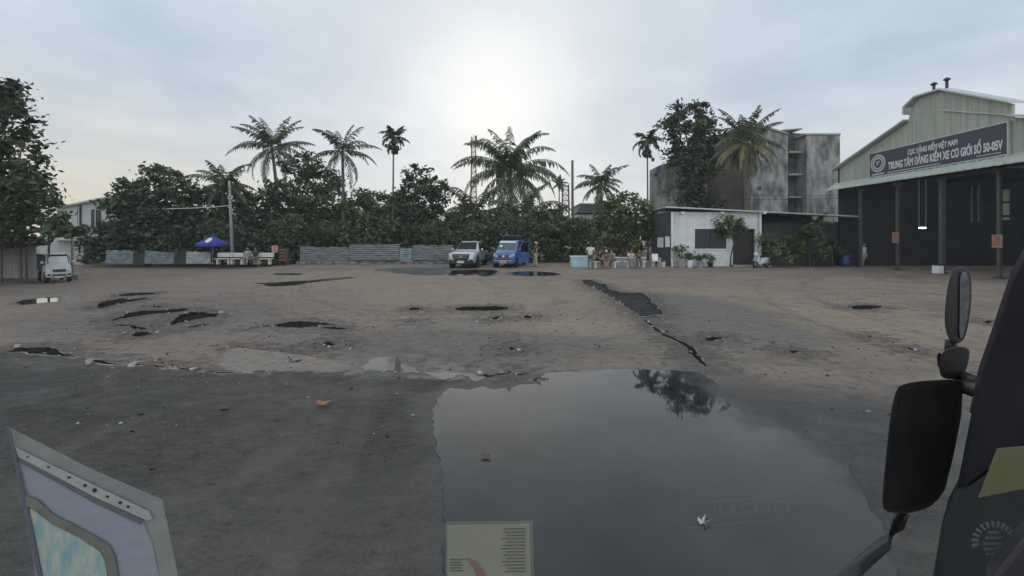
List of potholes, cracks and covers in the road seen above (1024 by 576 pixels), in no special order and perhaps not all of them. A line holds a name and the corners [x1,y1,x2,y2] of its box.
pothole [166,310,221,325]
pothole [96,297,149,308]
pothole [581,280,664,317]
pothole [110,308,189,321]
crack [641,316,708,367]
